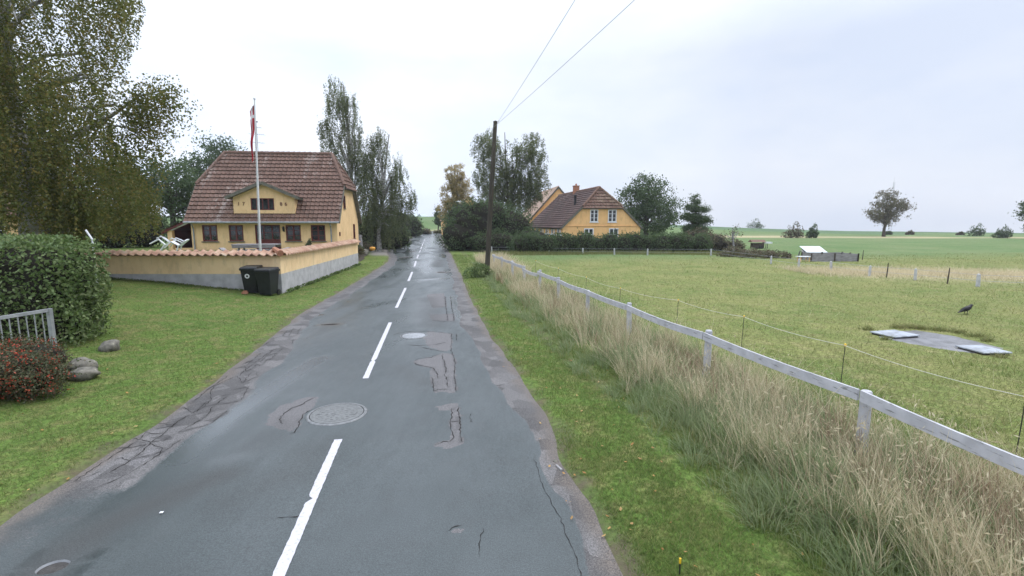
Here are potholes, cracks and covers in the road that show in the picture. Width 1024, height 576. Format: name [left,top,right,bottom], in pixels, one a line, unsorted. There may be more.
crack [75,329,300,488]
manhole cover [305,403,367,426]
crack [394,299,457,391]
manhole cover [35,559,70,575]
